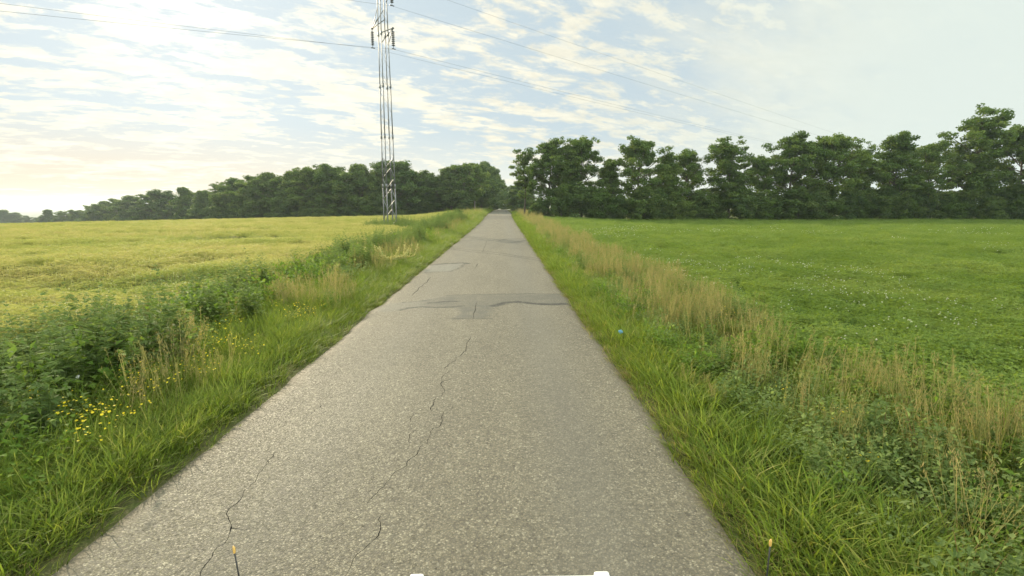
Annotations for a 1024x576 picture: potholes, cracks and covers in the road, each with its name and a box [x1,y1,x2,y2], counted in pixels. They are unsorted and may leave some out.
crack [346,336,471,575]
crack [200,451,276,576]
